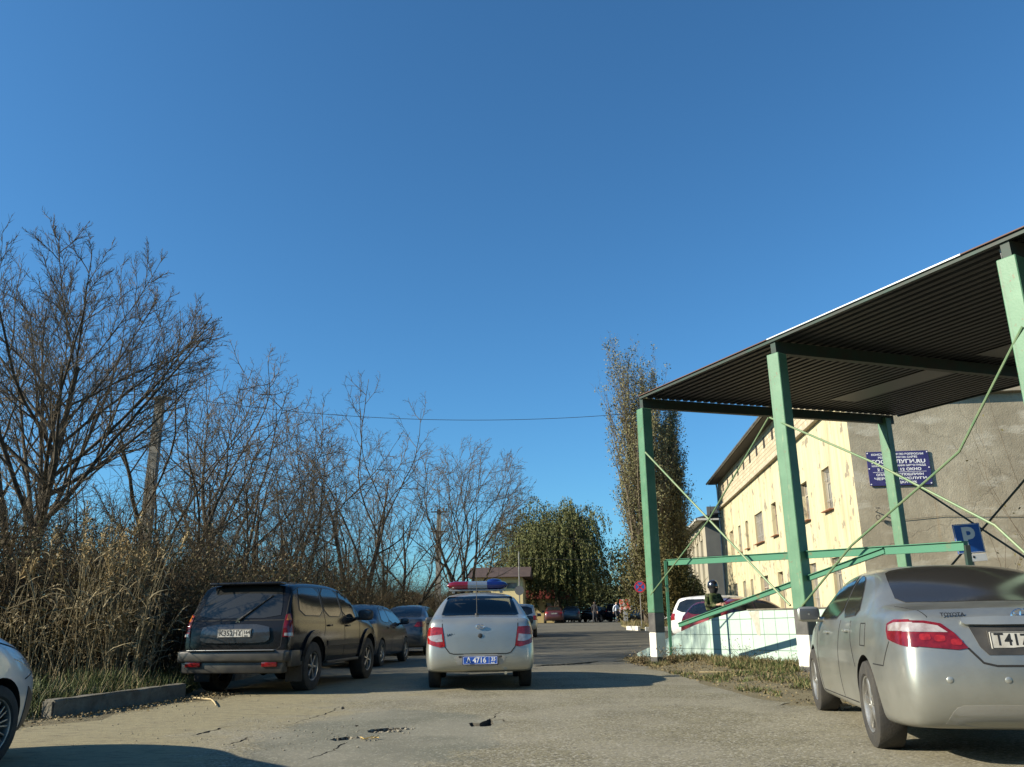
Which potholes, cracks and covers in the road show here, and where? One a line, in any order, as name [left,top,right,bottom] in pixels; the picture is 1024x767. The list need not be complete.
pothole [469,719,494,727]
